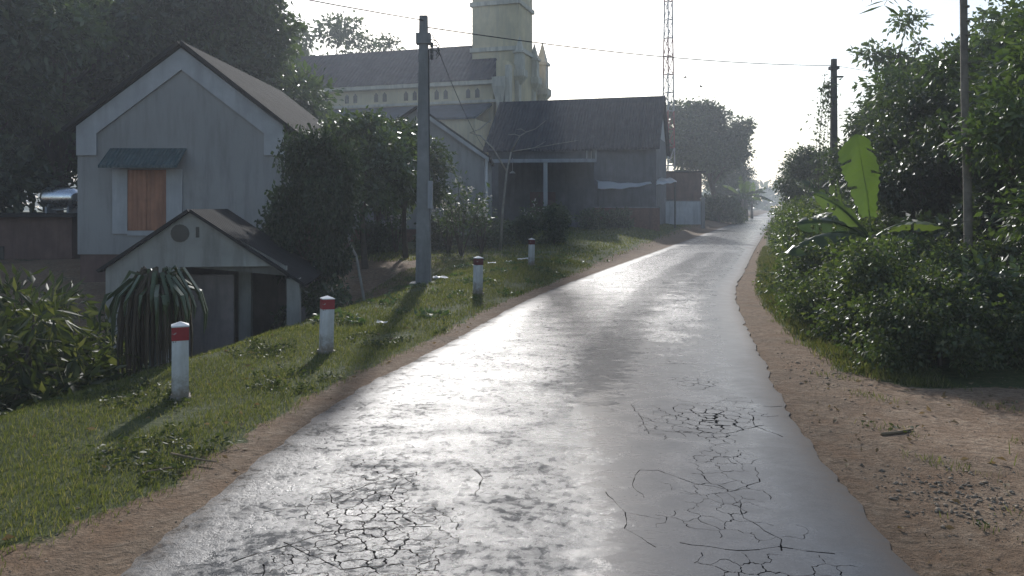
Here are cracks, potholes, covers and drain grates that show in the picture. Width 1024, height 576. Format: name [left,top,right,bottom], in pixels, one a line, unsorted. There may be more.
crack [631,398,851,576]
crack [233,453,466,576]
